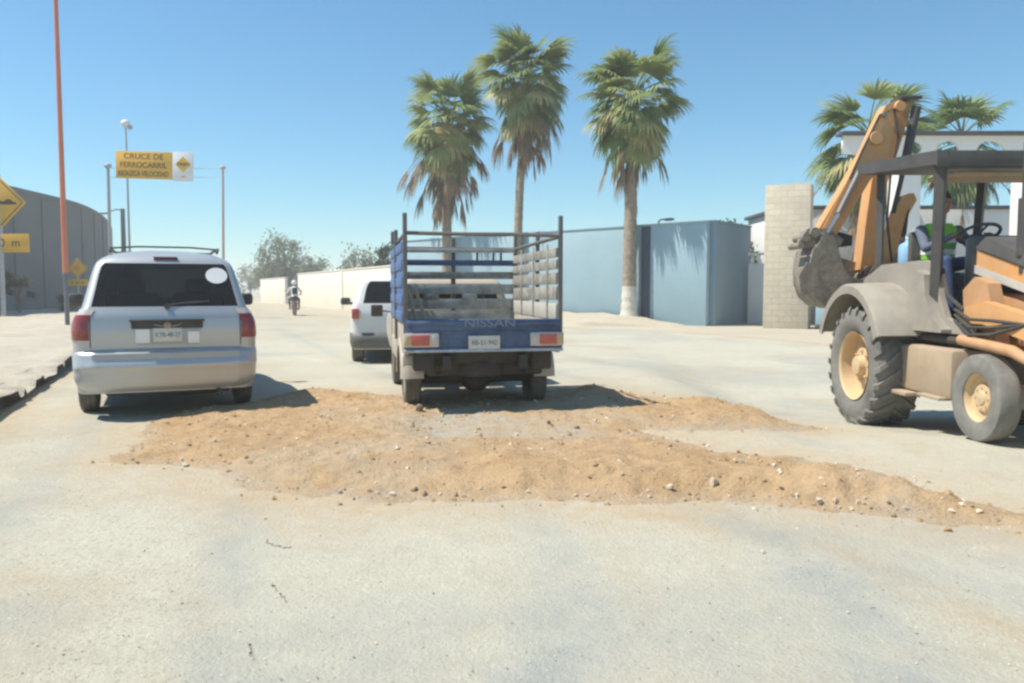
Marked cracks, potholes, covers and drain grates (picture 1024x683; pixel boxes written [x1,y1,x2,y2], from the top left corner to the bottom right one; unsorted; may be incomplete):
crack [249,541,292,661]
